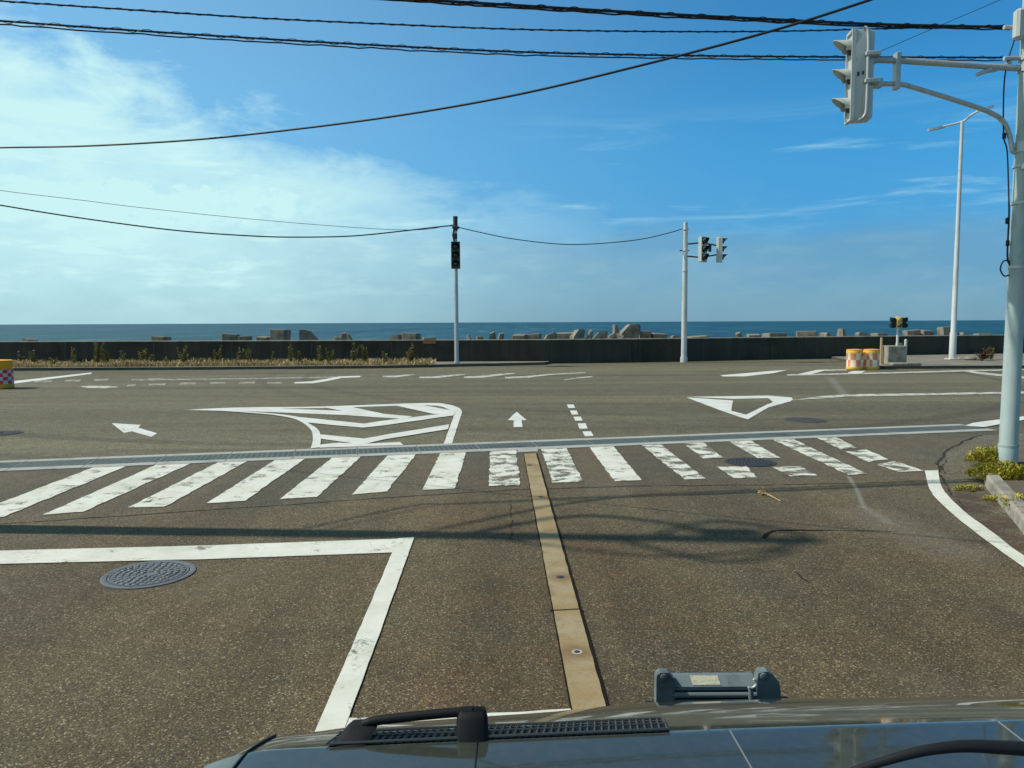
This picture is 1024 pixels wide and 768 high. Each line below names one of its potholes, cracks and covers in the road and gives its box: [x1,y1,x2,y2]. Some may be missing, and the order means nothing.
manhole cover [100,560,196,590]
crack [761,529,858,538]
manhole cover [725,457,777,467]
